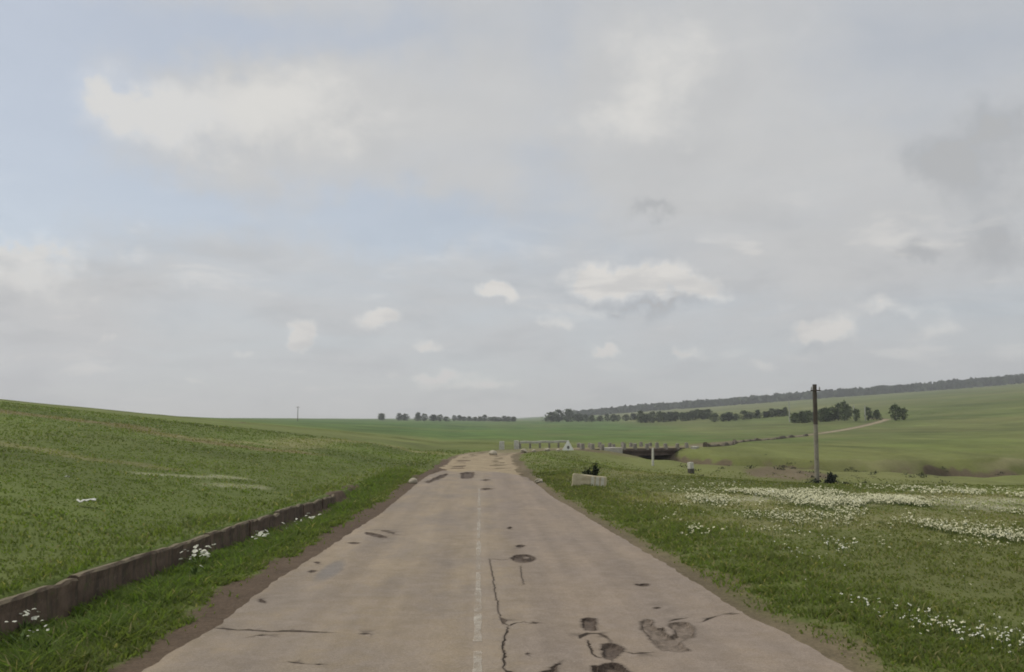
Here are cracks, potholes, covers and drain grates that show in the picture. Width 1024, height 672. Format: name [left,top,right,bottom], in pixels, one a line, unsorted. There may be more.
crack [489,559,539,672]
pothole [640,619,694,652]
crack [218,628,369,636]
pothole [600,643,625,661]
crack [579,633,650,658]
pothole [511,554,536,563]
pothole [581,618,597,631]
pothole [591,662,630,672]
